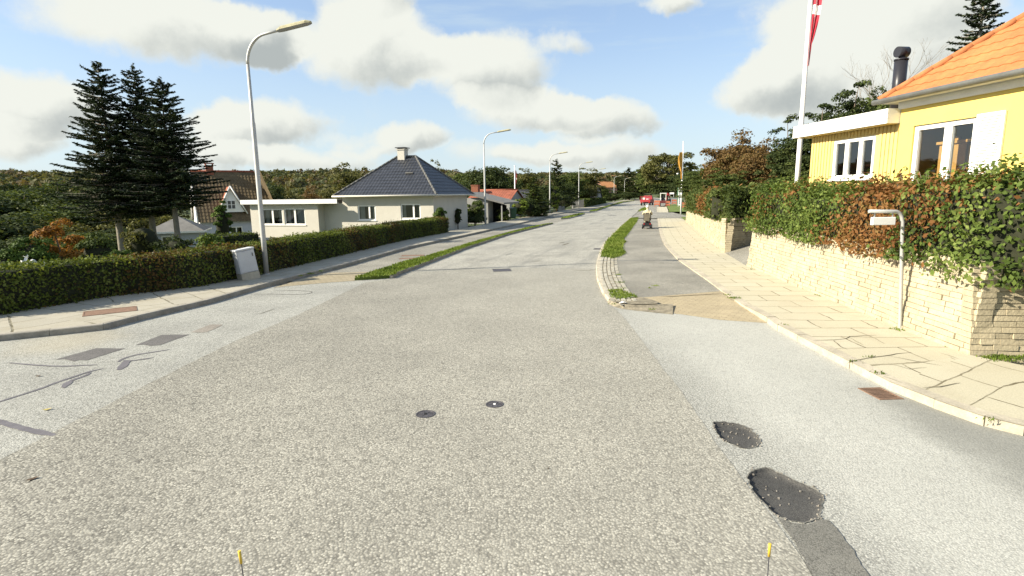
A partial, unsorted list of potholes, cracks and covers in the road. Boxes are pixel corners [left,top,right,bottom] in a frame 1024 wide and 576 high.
drain grate [858,387,904,400]
manhole cover [416,410,435,418]
